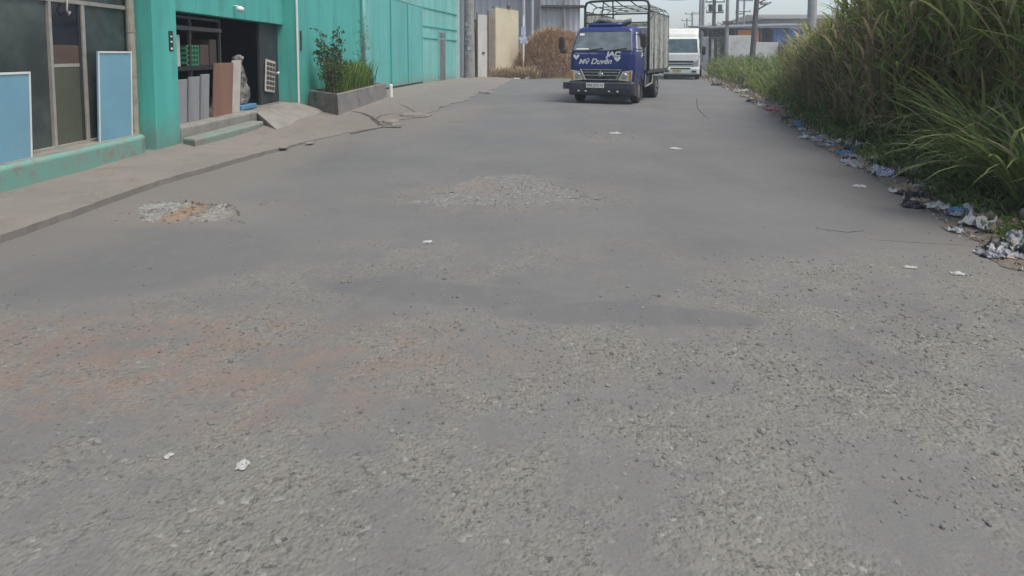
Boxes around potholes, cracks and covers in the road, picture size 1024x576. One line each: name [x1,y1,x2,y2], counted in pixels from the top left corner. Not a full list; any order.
crack [815,227,975,247]
pothole [137,201,241,223]
crack [350,104,415,134]
pothole [407,174,599,207]
